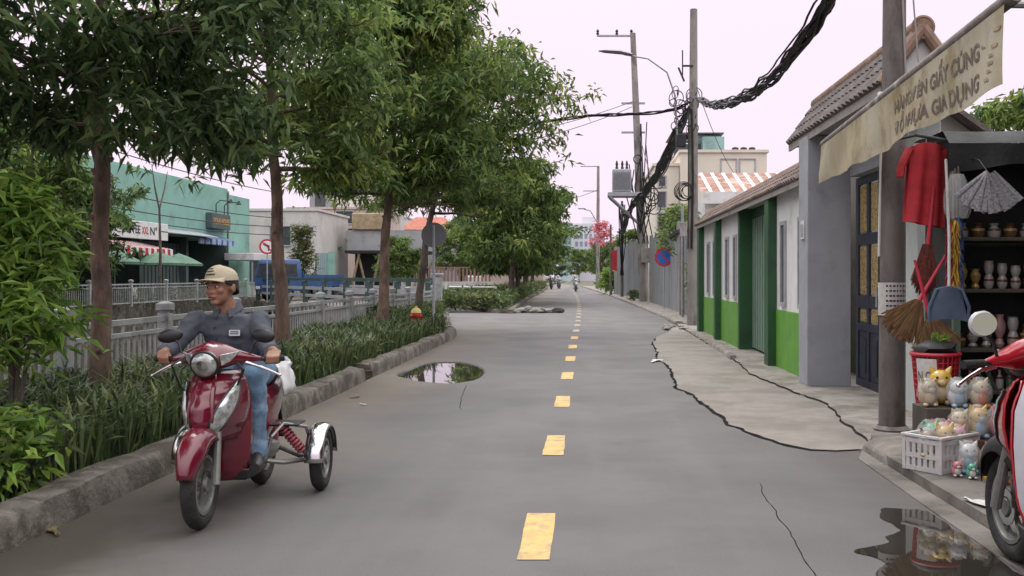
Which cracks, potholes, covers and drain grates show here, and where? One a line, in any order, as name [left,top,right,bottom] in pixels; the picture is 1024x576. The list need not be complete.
crack [760,484,816,576]
pothole [396,362,485,384]
crack [651,335,868,452]
